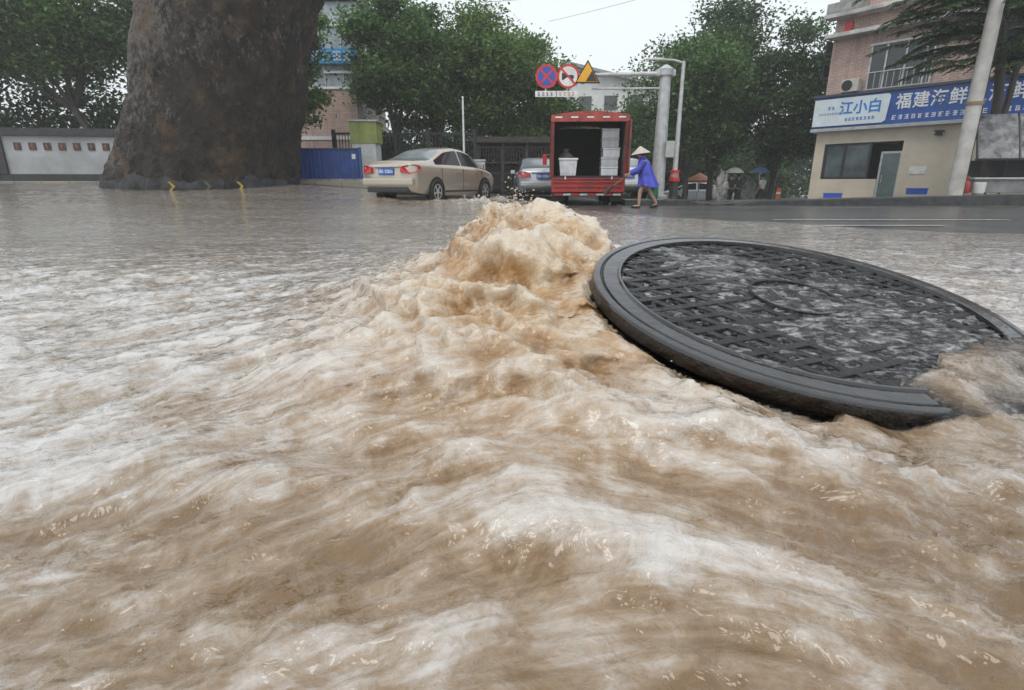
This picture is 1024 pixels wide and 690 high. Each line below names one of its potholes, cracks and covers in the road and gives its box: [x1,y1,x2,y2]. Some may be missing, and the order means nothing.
manhole cover [591,237,1024,429]
